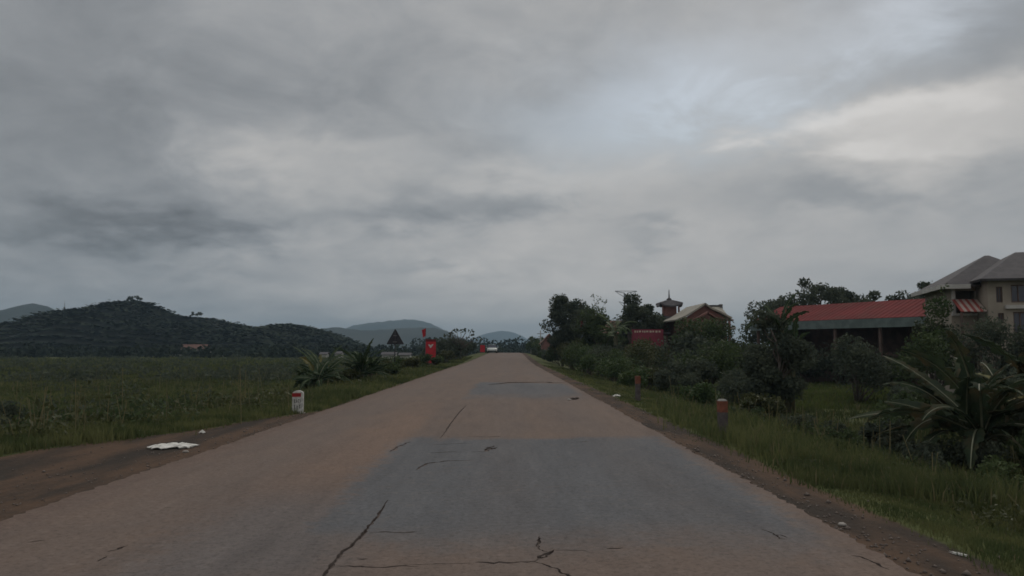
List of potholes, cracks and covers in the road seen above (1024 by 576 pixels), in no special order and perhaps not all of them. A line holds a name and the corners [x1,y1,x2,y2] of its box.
crack [350,536,584,576]
crack [416,436,499,470]
